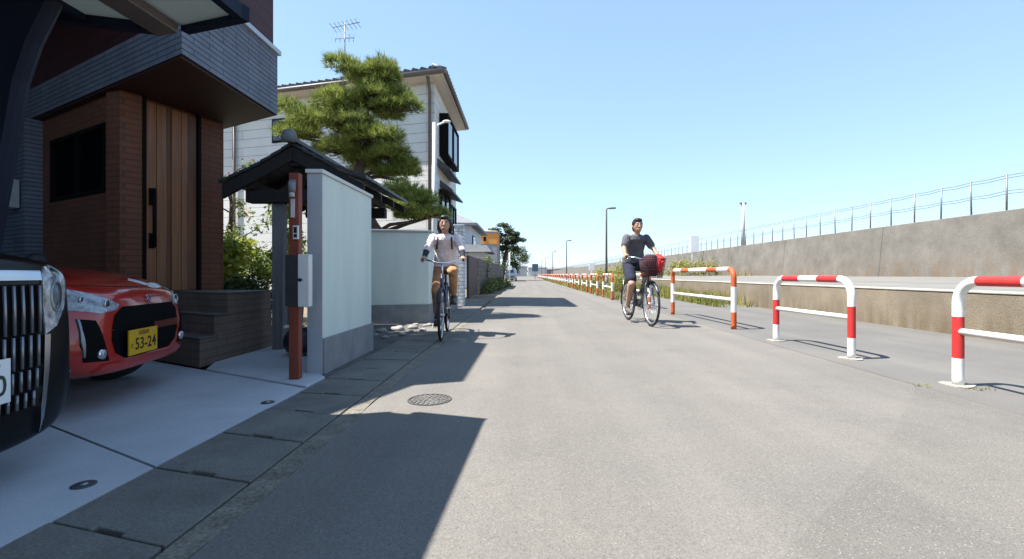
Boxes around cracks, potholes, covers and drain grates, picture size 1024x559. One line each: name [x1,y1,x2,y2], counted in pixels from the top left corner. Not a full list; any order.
manhole cover [407,394,452,406]
